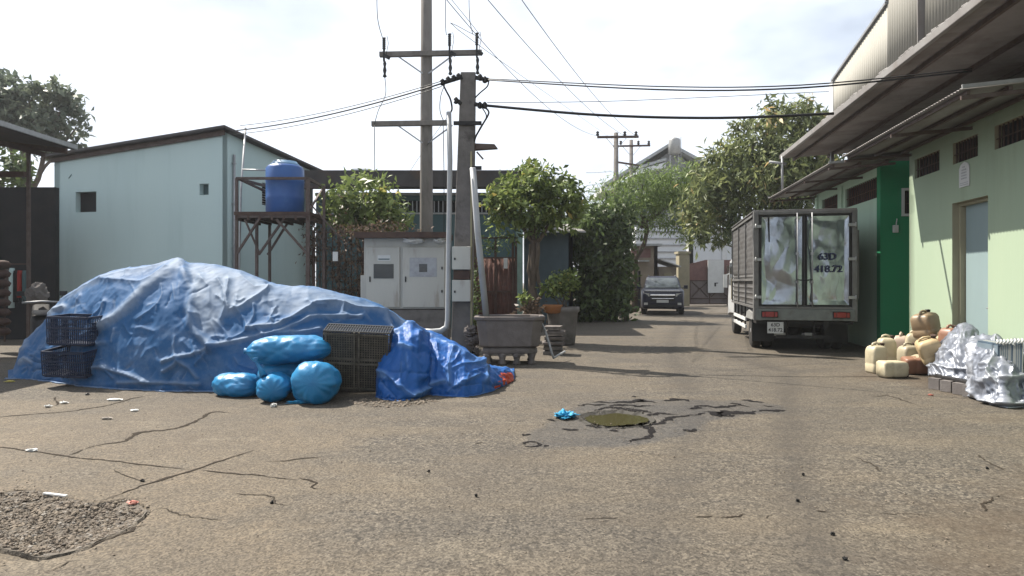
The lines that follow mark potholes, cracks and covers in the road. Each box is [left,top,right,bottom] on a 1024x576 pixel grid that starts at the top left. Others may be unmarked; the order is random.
crack [980,495,1003,511]
crack [522,396,785,447]
crack [72,411,223,454]
pothole [0,490,150,561]
